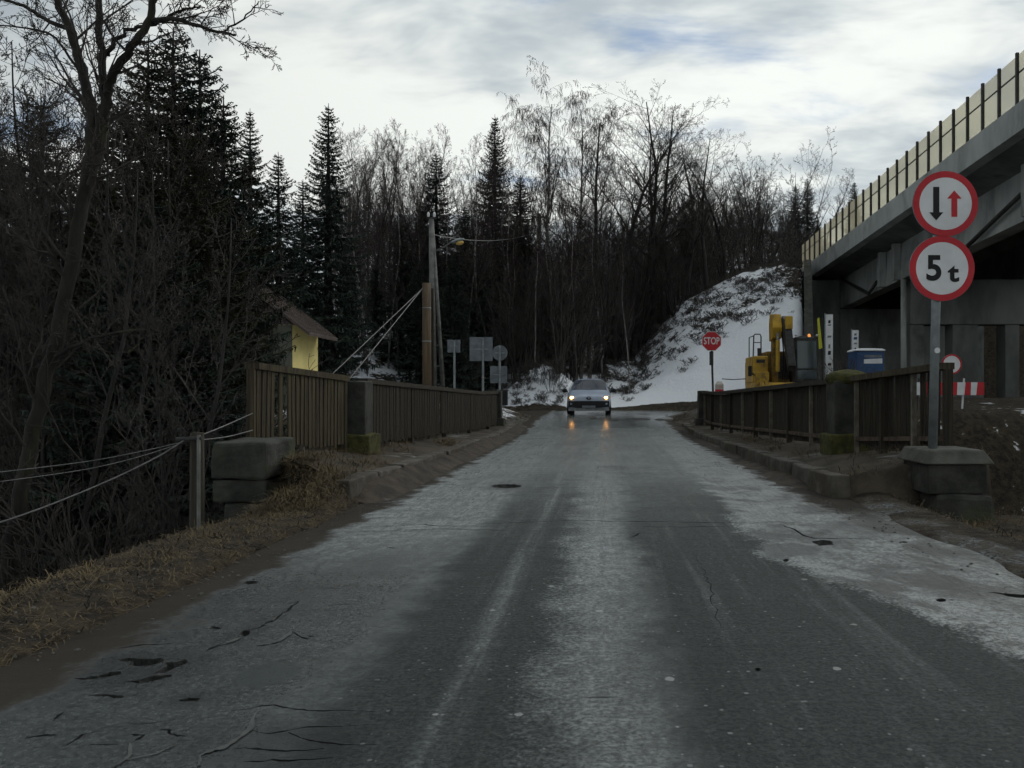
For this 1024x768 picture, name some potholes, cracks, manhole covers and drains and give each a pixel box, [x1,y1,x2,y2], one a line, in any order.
crack [26,704,375,767]
crack [784,526,858,539]
crack [205,588,356,652]
pothole [118,658,164,666]
